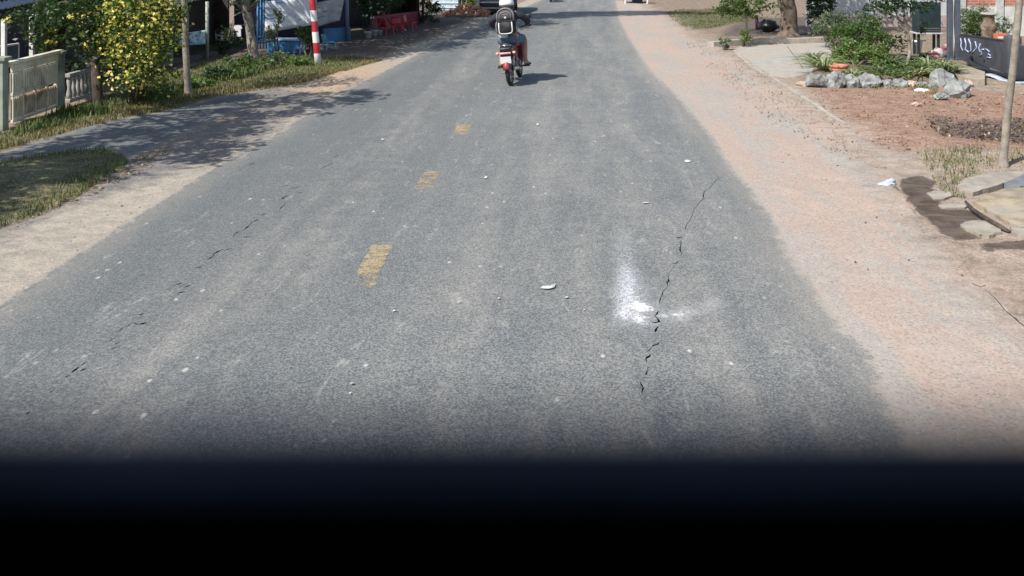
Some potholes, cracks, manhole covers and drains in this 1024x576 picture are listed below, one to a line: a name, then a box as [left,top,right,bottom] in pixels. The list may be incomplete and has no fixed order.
crack [971,282,1024,326]
